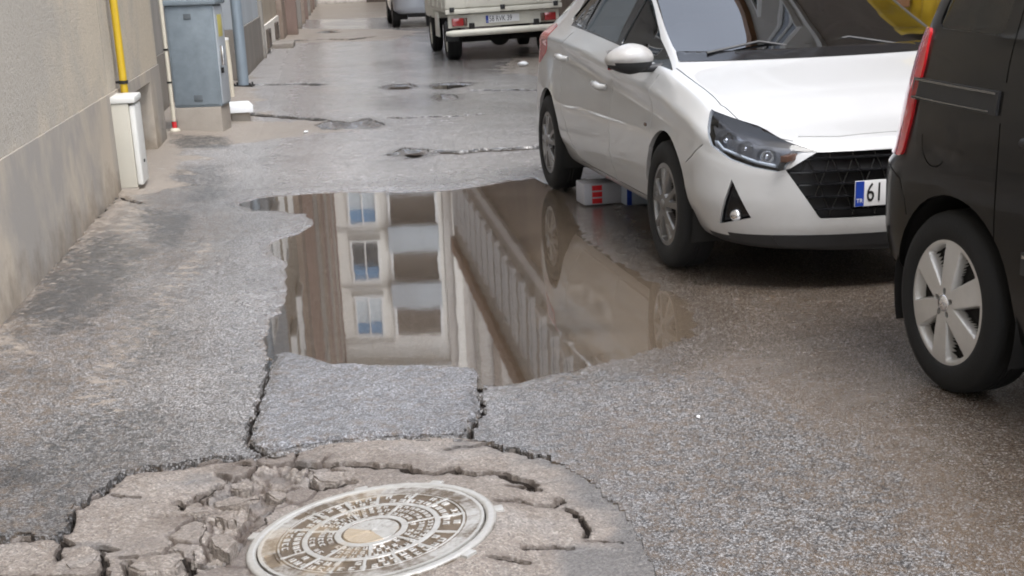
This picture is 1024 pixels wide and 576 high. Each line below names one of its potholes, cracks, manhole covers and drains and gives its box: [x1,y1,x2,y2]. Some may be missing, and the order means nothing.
crack [404,148,534,158]
crack [0,360,656,576]
pothole [315,119,384,130]
manhole cover [246,480,504,576]
